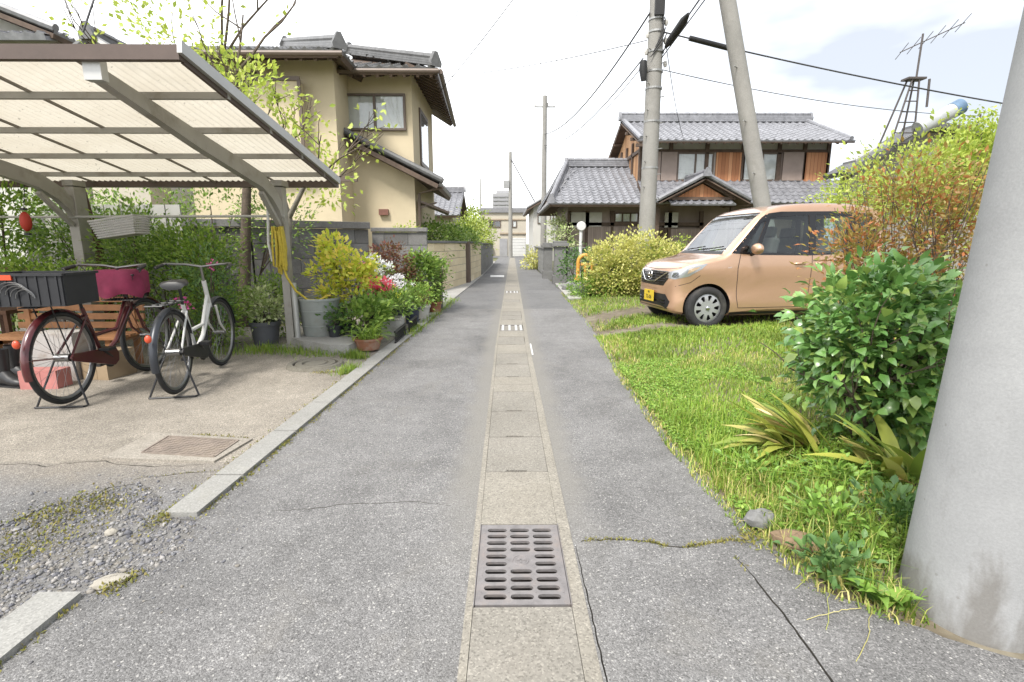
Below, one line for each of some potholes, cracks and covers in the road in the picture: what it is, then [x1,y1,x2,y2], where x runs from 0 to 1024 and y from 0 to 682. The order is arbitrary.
crack [274,501,450,511]
crack [576,533,834,682]
manhole cover [285,357,345,372]
drain grate [473,523,572,607]
manhole cover [102,432,253,463]
crack [2,460,211,480]
